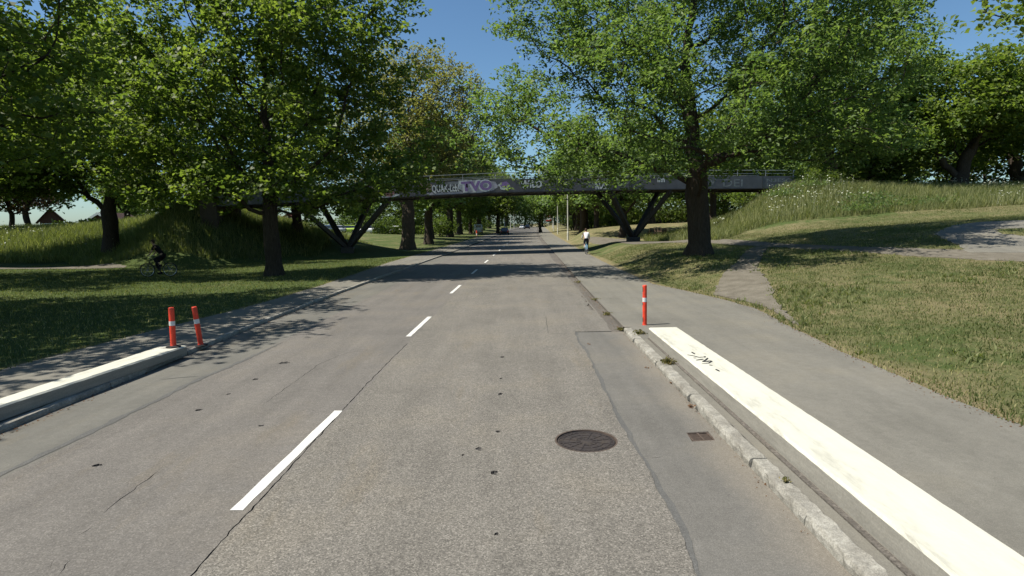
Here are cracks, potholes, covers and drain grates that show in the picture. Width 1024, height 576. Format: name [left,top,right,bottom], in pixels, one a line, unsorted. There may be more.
manhole cover [555,429,618,452]
crack [190,343,408,576]
